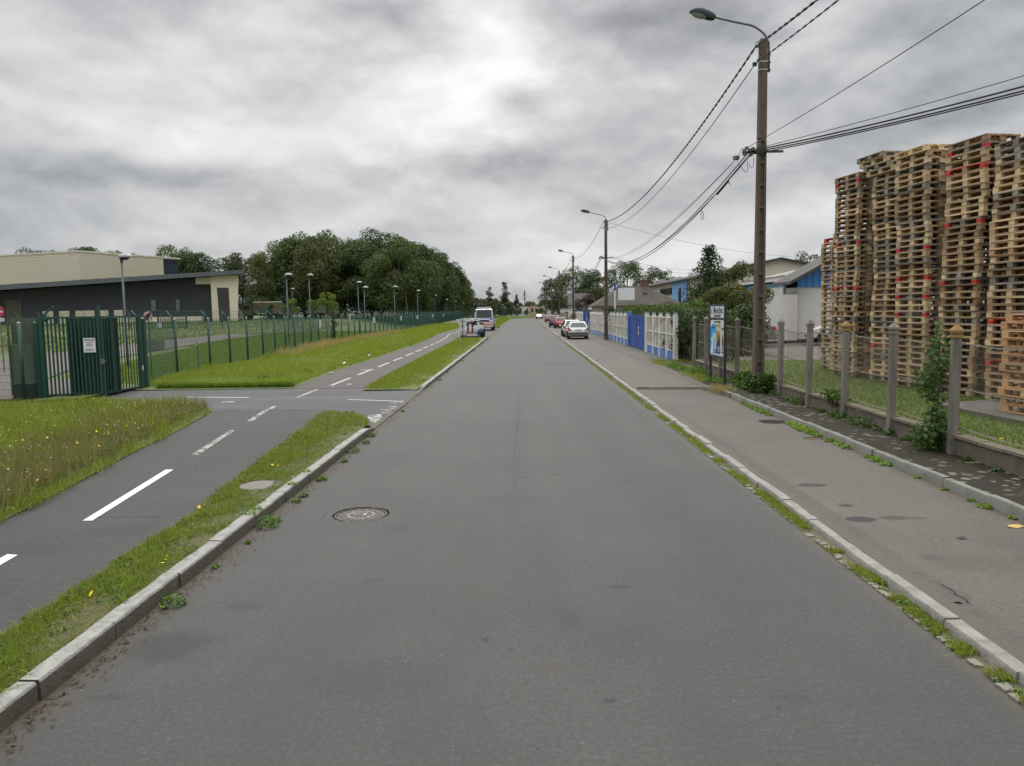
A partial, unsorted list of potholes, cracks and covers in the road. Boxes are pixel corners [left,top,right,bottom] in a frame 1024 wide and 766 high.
manhole cover [332,507,390,522]
manhole cover [239,481,277,490]
